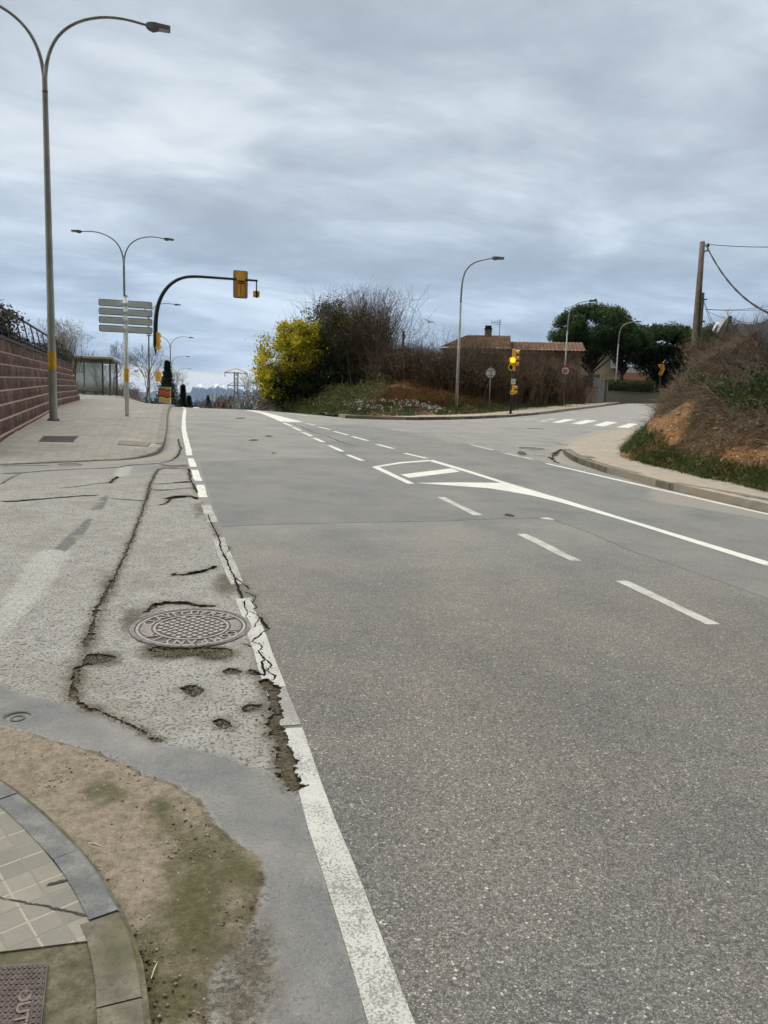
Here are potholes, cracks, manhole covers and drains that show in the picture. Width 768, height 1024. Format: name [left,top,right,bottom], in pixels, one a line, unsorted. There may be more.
pothole [83,654,117,665]
utility cover [0,962,49,1024]
manhole cover [130,608,251,648]
crack [1,439,306,792]
crack [0,897,87,916]
pothole [179,685,204,697]
crack [548,444,562,464]
manhole cover [2,711,33,723]
pothole [148,646,233,660]
